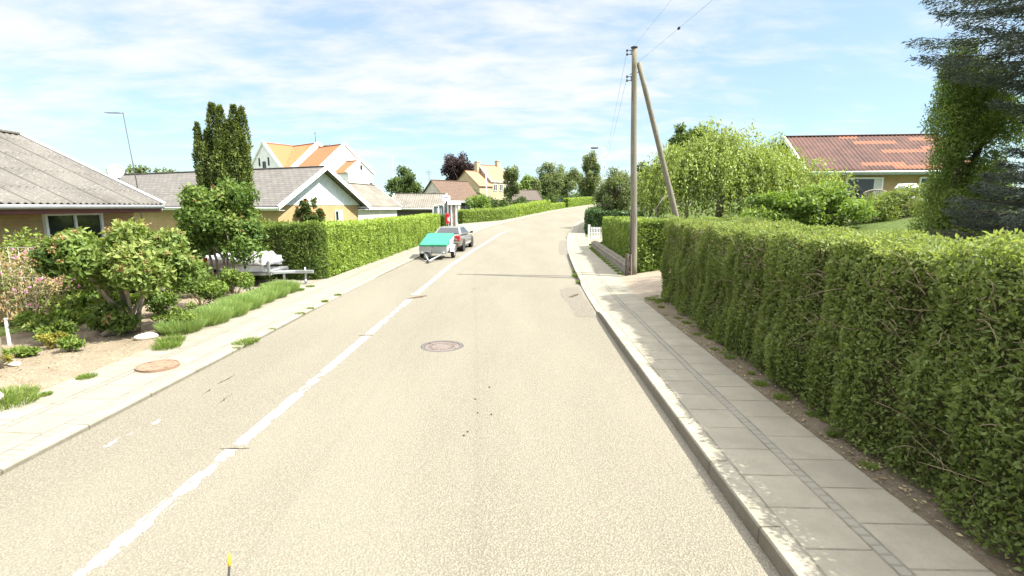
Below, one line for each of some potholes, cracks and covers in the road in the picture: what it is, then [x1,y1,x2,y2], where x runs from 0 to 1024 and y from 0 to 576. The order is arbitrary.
manhole cover [421,341,463,352]
manhole cover [135,359,180,373]
